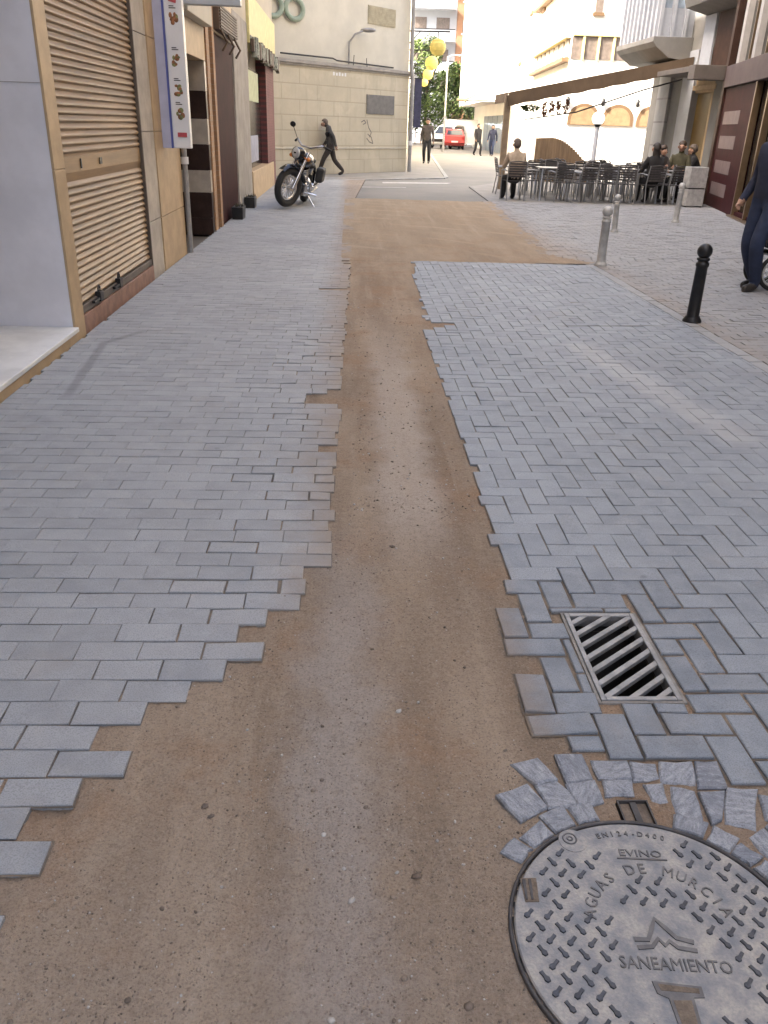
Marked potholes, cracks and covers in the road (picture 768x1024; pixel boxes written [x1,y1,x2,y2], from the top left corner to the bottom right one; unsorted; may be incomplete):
drain grate [560,613,687,705]
manhole cover [508,800,768,1024]
